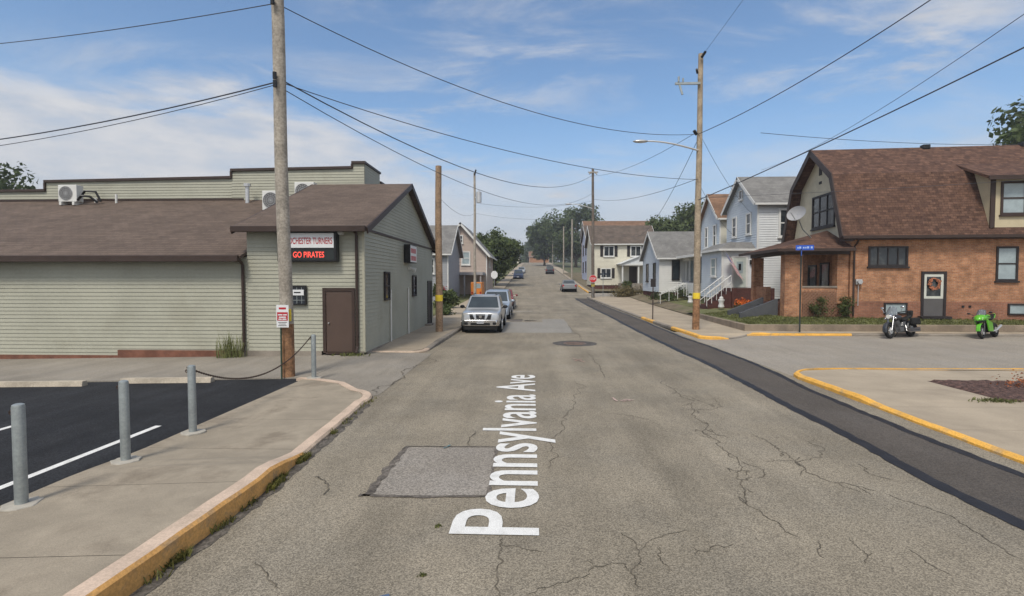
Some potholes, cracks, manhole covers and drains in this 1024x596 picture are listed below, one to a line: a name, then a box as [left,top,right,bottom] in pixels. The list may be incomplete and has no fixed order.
crack [660,380,796,536]
crack [254,562,278,588]
crack [549,384,587,471]
crack [528,530,732,594]
crack [750,433,1019,558]
crack [494,538,541,596]
